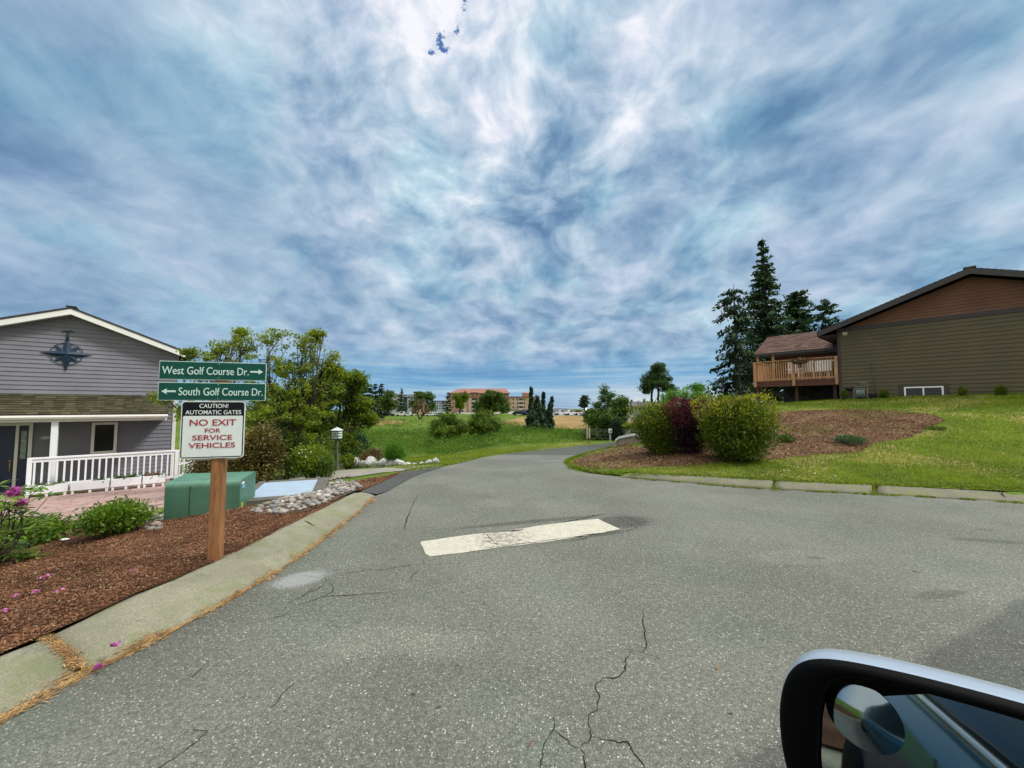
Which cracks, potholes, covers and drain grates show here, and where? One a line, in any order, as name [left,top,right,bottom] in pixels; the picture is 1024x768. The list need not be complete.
crack [273,560,424,618]
crack [540,612,652,768]
